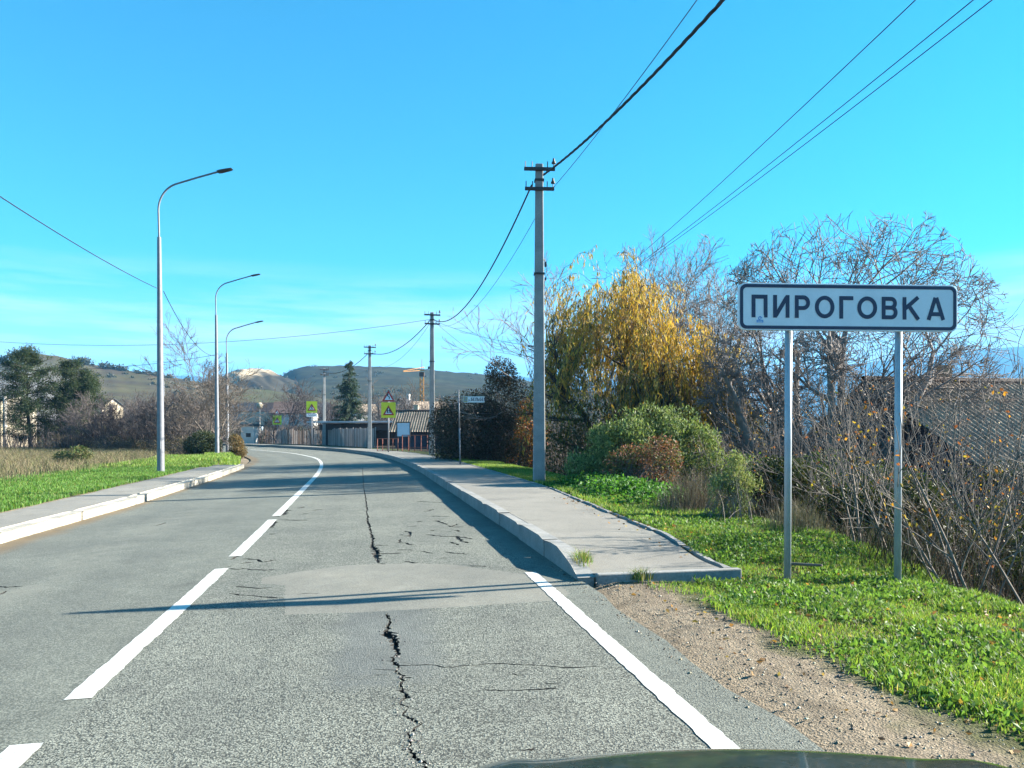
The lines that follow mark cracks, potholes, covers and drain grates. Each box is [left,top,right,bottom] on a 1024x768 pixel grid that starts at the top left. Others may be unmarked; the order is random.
crack [373,614,596,768]
crack [362,468,471,563]
